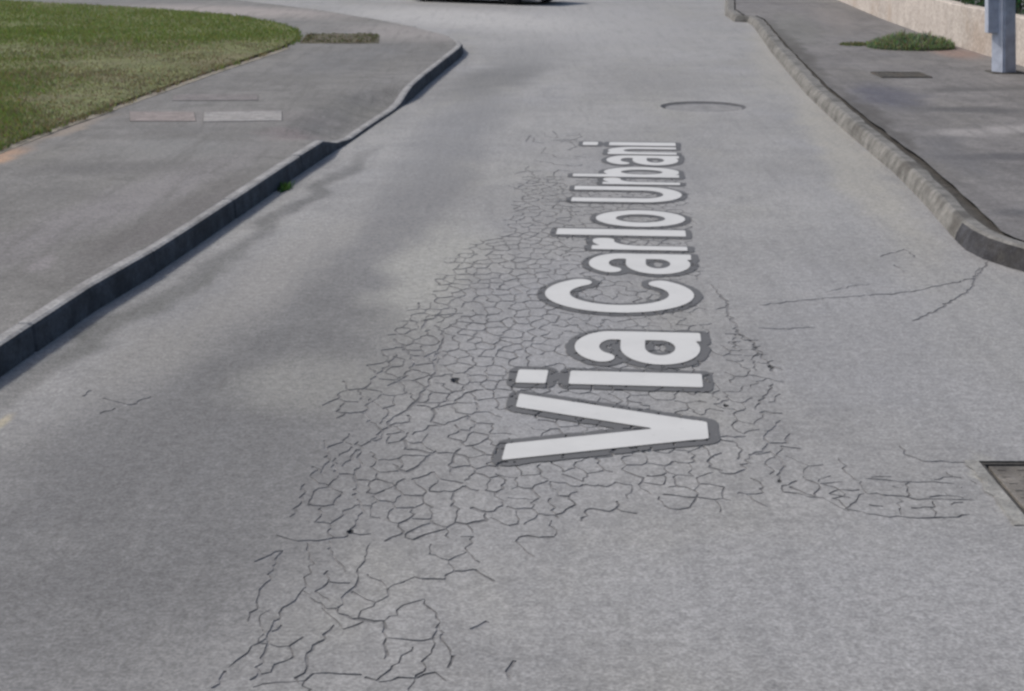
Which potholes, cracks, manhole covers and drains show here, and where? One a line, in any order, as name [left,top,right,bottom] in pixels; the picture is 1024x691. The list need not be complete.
manhole cover [660,101,746,112]
crack [83,390,151,413]
manhole cover [964,460,1024,525]
crack [211,131,976,691]
